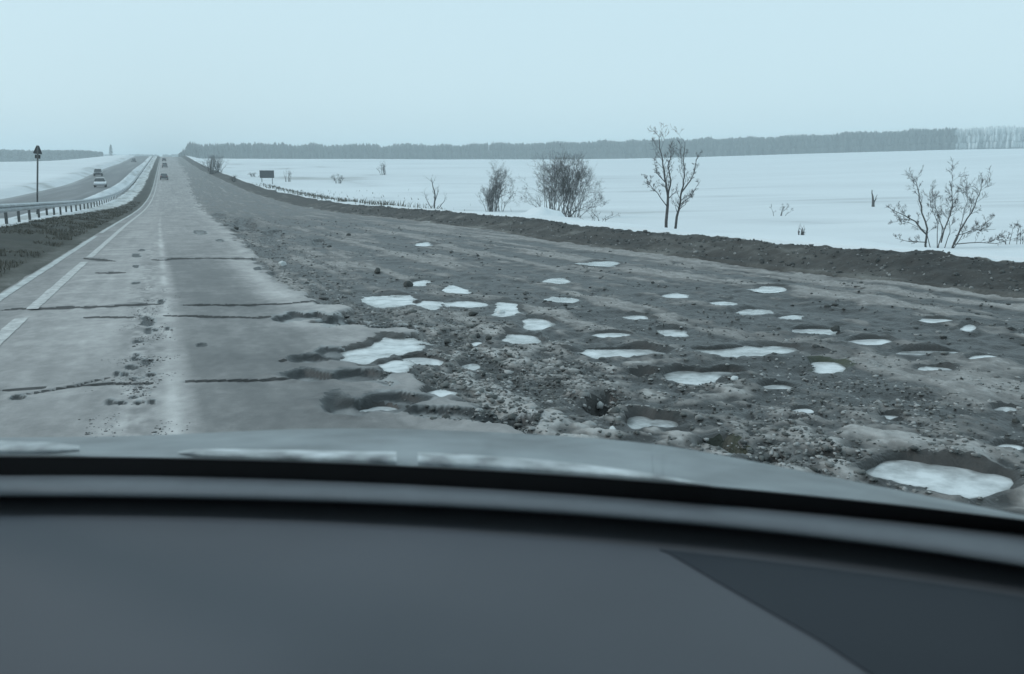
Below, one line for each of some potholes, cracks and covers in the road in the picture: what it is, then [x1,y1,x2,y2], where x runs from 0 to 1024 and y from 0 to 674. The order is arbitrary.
pothole [495,326,548,345]
pothole [806,356,855,374]
pothole [319,388,441,416]
pothole [584,389,621,417]
pothole [856,446,1024,499]
pothole [483,297,527,317]
pothole [826,333,901,349]
pothole [658,363,752,386]
pothole [518,314,562,332]
pothole [377,357,418,373]
pothole [338,331,454,366]
pothole [355,290,457,311]
